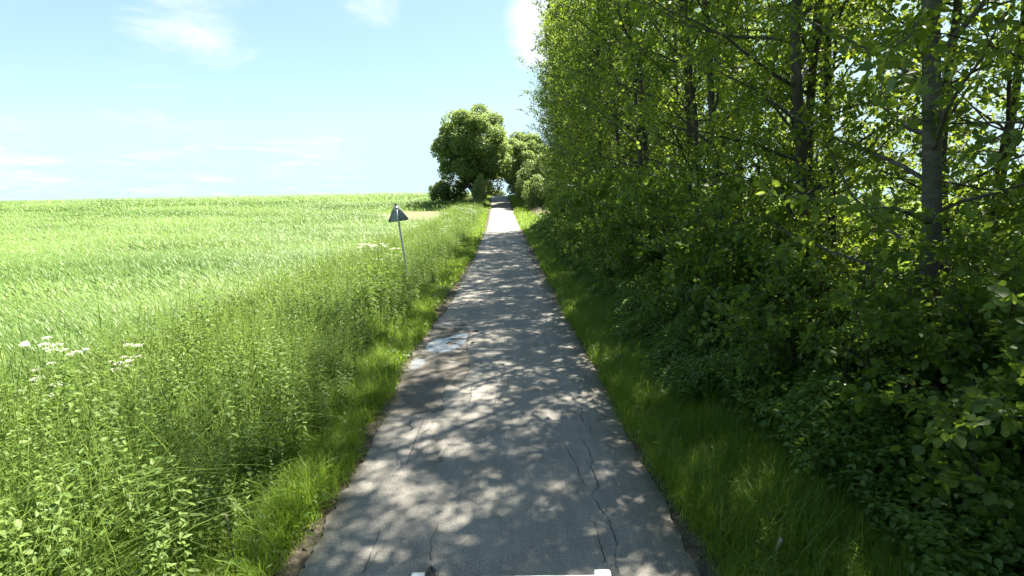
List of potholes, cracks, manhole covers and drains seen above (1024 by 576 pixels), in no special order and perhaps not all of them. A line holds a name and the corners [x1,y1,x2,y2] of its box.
crack [553,375,619,573]
crack [393,419,433,475]
